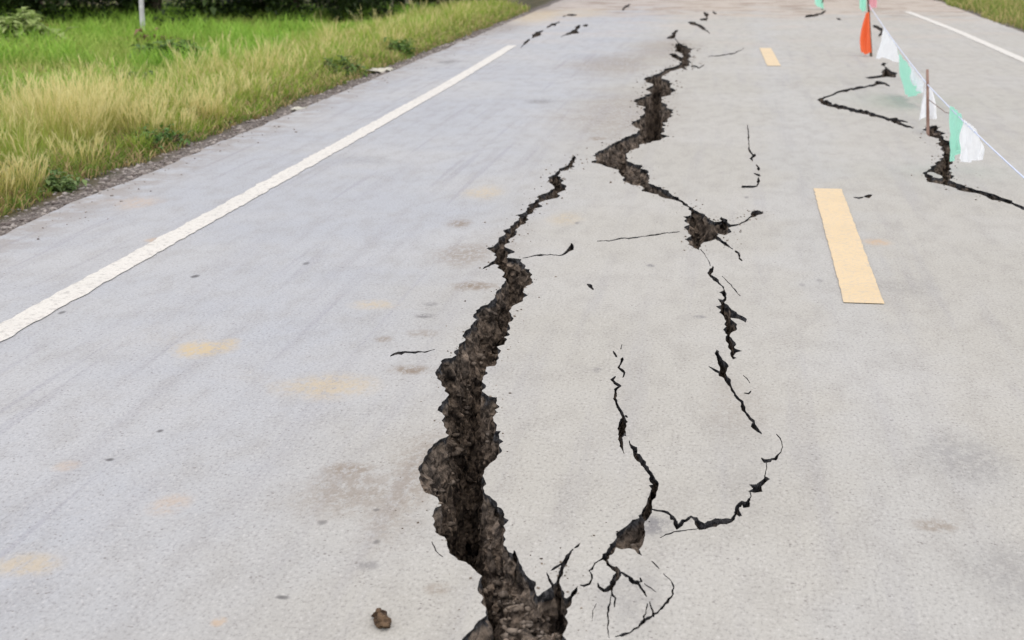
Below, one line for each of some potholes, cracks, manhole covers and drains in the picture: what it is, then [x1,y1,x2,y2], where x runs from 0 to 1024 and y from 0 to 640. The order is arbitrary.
crack [390,11,783,640]
crack [818,25,1024,210]
